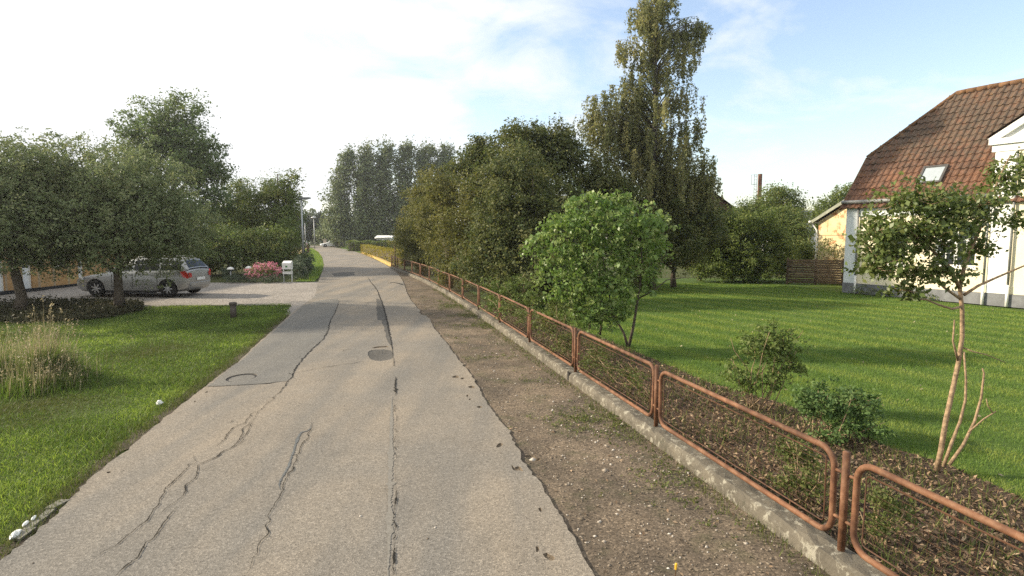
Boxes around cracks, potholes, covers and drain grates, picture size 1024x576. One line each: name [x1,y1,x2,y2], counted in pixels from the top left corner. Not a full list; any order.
crack [225,306,344,413]
crack [368,278,403,574]
crack [247,426,313,573]
crack [84,409,262,576]
manhole cover [226,374,257,382]
